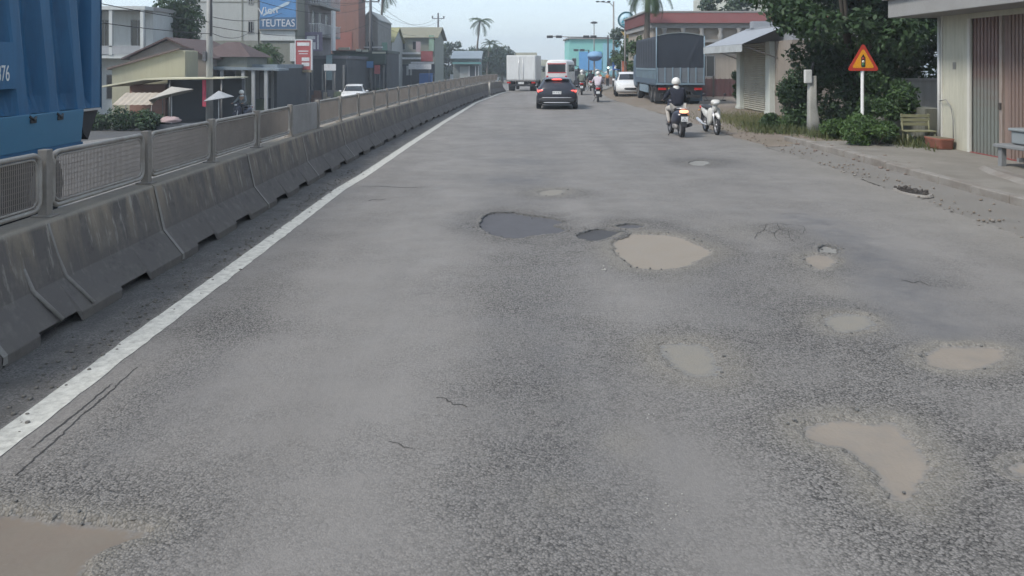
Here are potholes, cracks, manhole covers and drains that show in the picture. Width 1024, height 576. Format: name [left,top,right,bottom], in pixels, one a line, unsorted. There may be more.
pothole [812,243,845,256]
pothole [649,339,733,382]
pothole [571,227,631,242]
pothole [812,307,886,335]
pothole [786,408,952,509]
pothole [605,231,720,271]
pothole [911,340,1020,374]
pothole [795,252,846,271]
pothole [473,210,571,240]
pothole [0,499,170,576]
